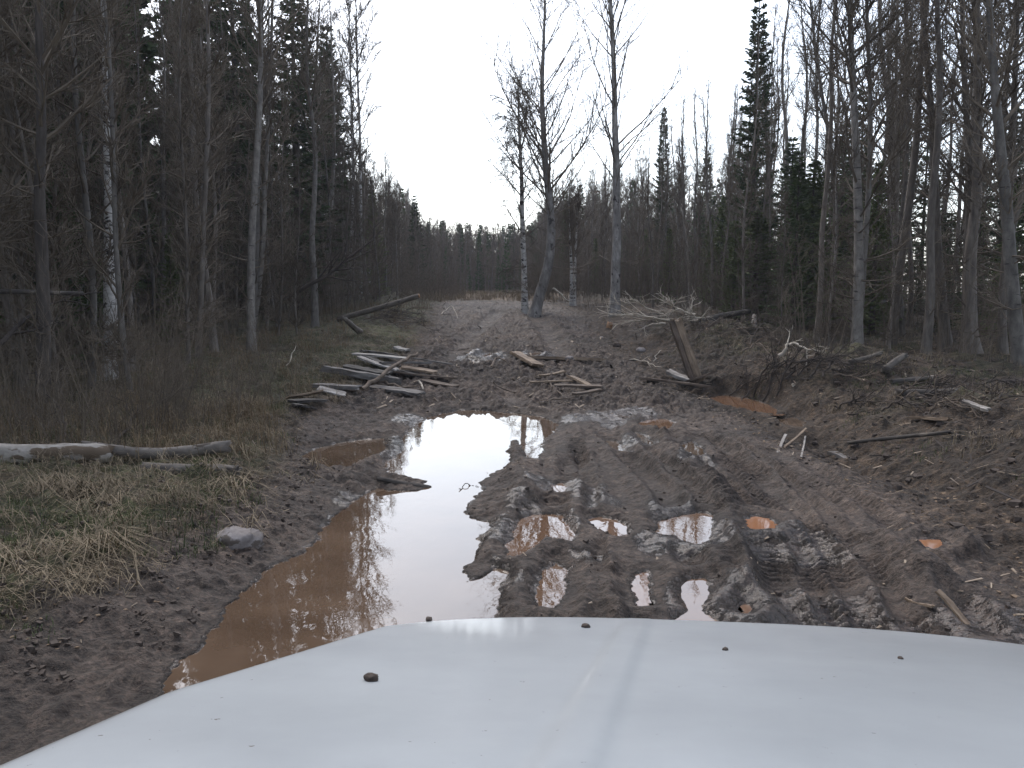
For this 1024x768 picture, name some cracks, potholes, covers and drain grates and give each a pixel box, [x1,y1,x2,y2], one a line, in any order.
pothole [647,505,725,544]
pothole [648,569,748,623]
pothole [582,509,642,536]
pothole [522,555,581,609]
pothole [623,565,662,606]
pothole [496,504,594,556]
pothole [149,405,564,701]
